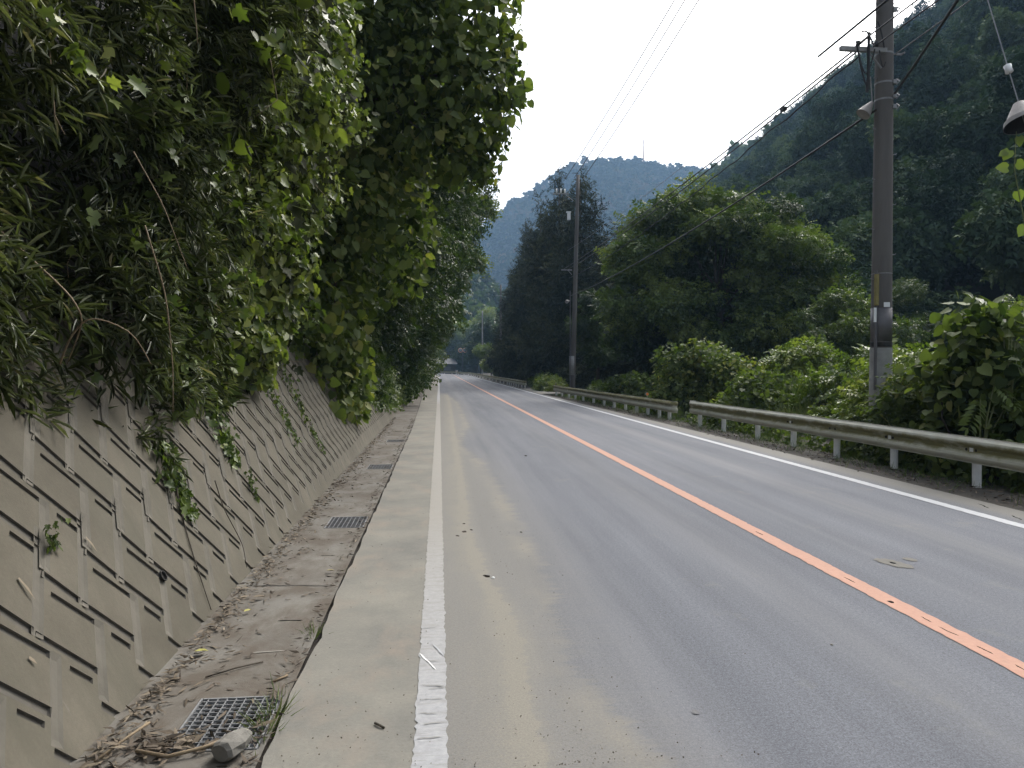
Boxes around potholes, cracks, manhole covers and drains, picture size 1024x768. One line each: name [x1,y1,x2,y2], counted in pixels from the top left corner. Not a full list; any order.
drain grate [324,516,368,528]
drain grate [167,695,283,754]
